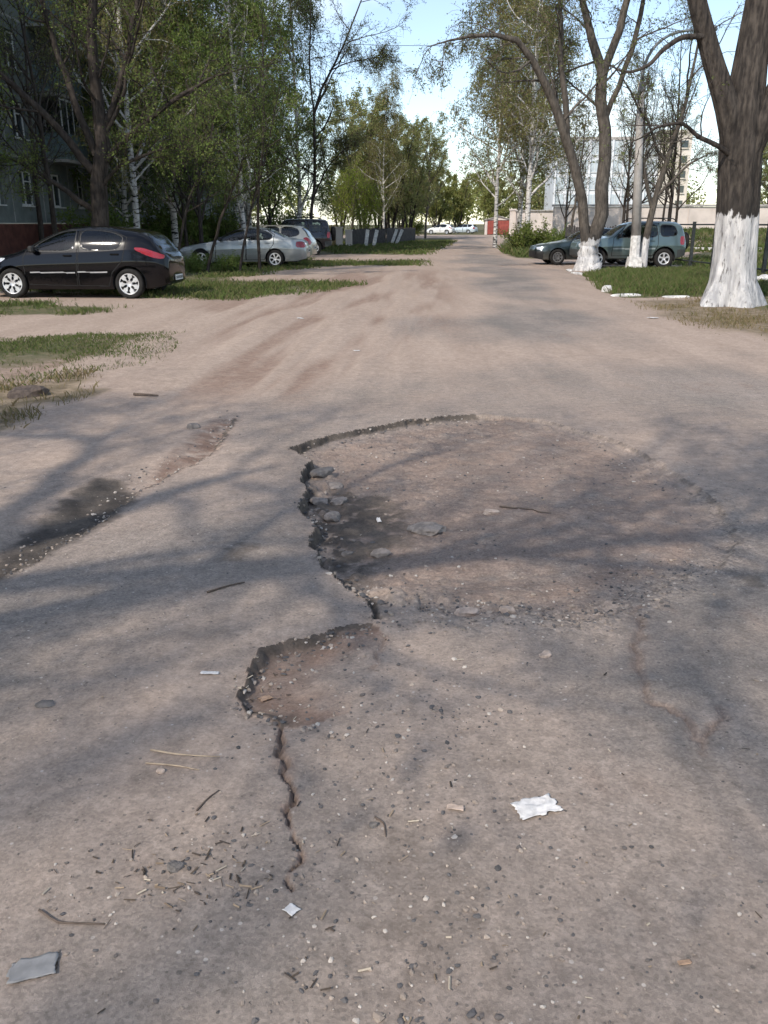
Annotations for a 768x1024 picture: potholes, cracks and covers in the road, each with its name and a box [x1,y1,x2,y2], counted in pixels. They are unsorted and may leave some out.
crack [625,604,734,756]
pothole [234,622,385,729]
crack [272,721,308,892]
pothole [289,414,743,622]
pothole [0,416,239,580]
